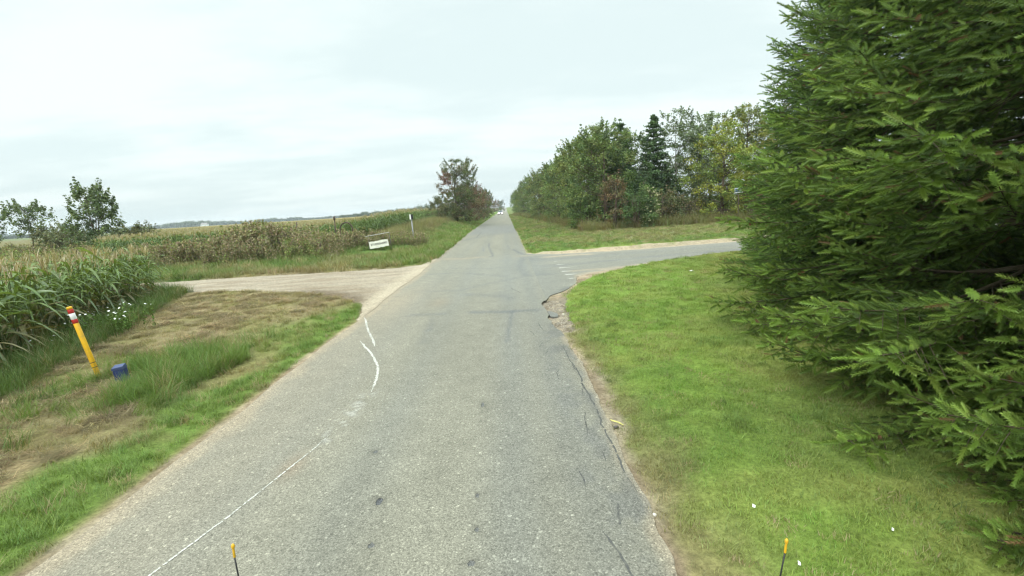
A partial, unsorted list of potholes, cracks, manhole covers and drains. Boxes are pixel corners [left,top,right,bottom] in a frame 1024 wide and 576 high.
pothole [363,493,393,509]
pothole [542,300,575,333]
crack [603,532,633,576]
crack [530,323,637,491]
